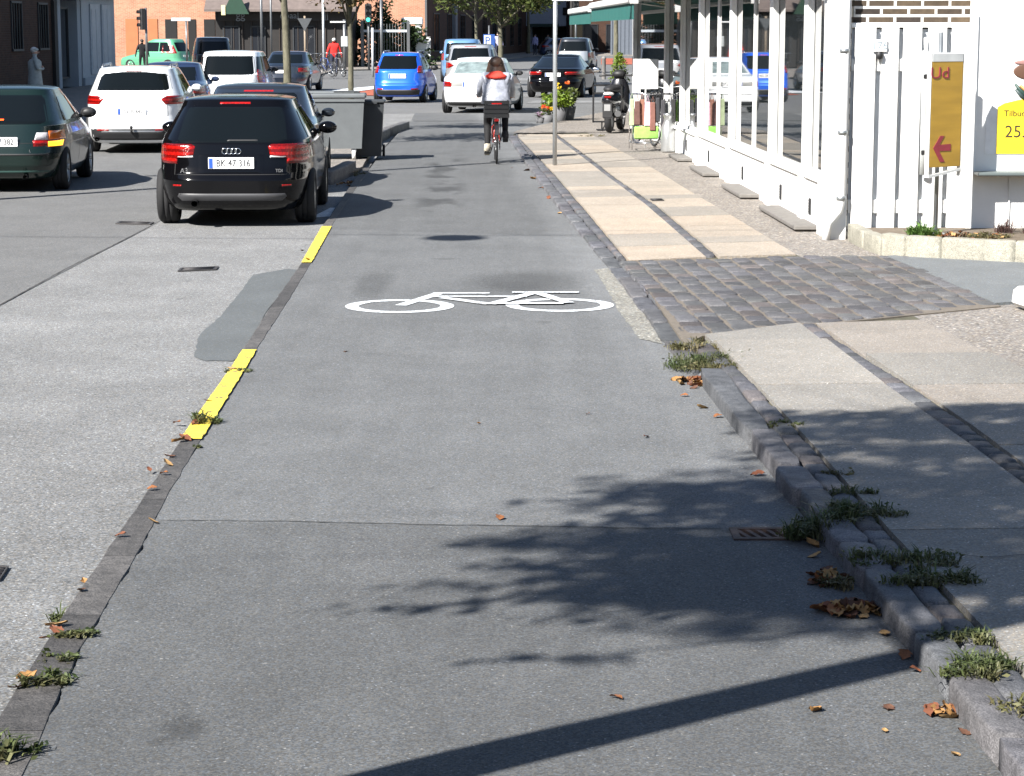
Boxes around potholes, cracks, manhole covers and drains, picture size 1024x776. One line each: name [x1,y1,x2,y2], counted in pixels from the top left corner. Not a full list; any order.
drain grate [729,527,810,541]
